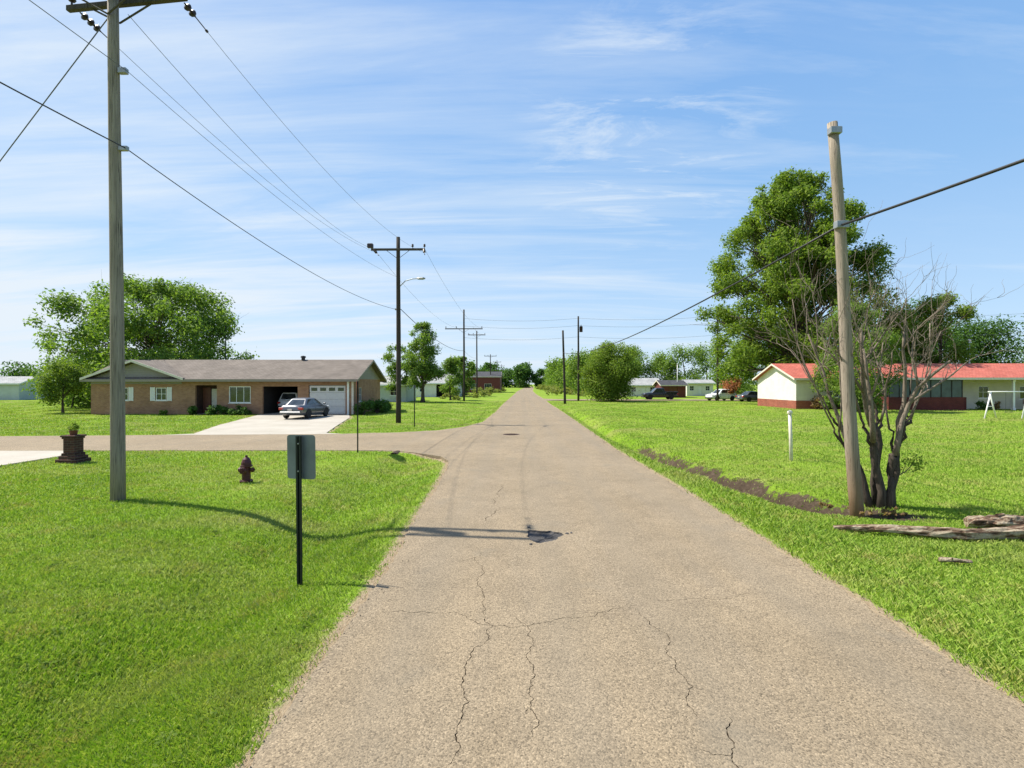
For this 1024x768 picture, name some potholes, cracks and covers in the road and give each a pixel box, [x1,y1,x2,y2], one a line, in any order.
pothole [527,526,572,545]
crack [392,558,748,764]
